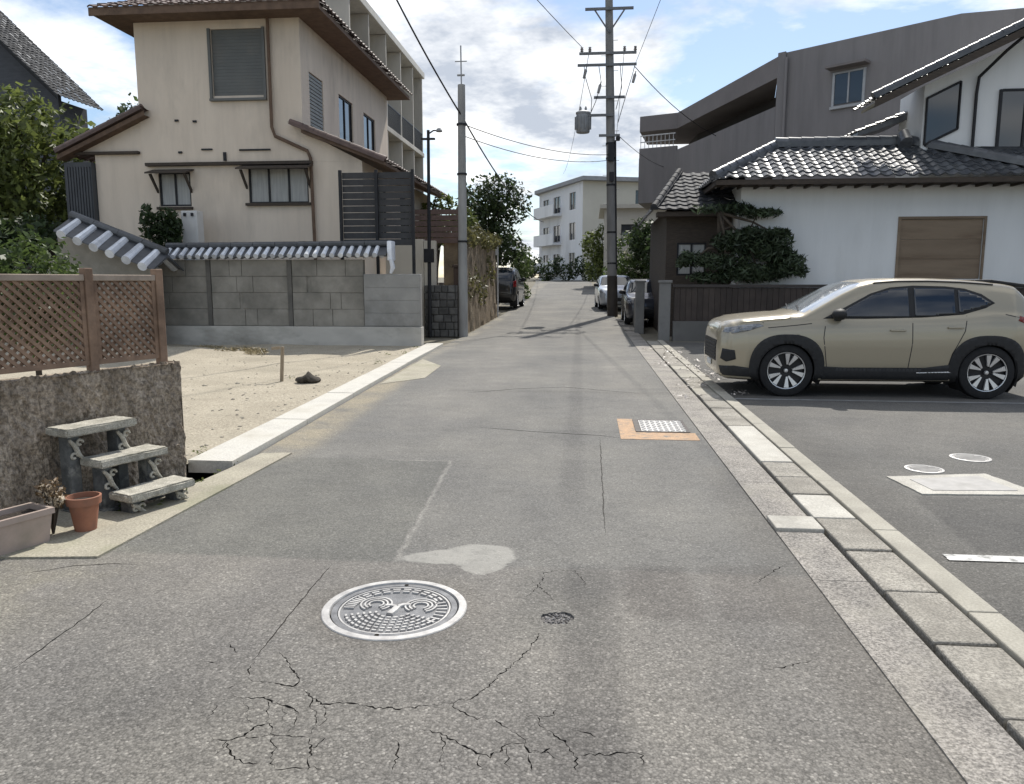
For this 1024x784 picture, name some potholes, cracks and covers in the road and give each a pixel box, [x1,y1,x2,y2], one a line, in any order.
utility cover [617,419,700,441]
pothole [541,612,574,625]
utility cover [887,473,1024,496]
manhole cover [949,453,992,462]
manhole cover [321,580,467,641]
crack [204,633,644,770]
manhole cover [904,464,945,474]
crack [12,602,104,670]
